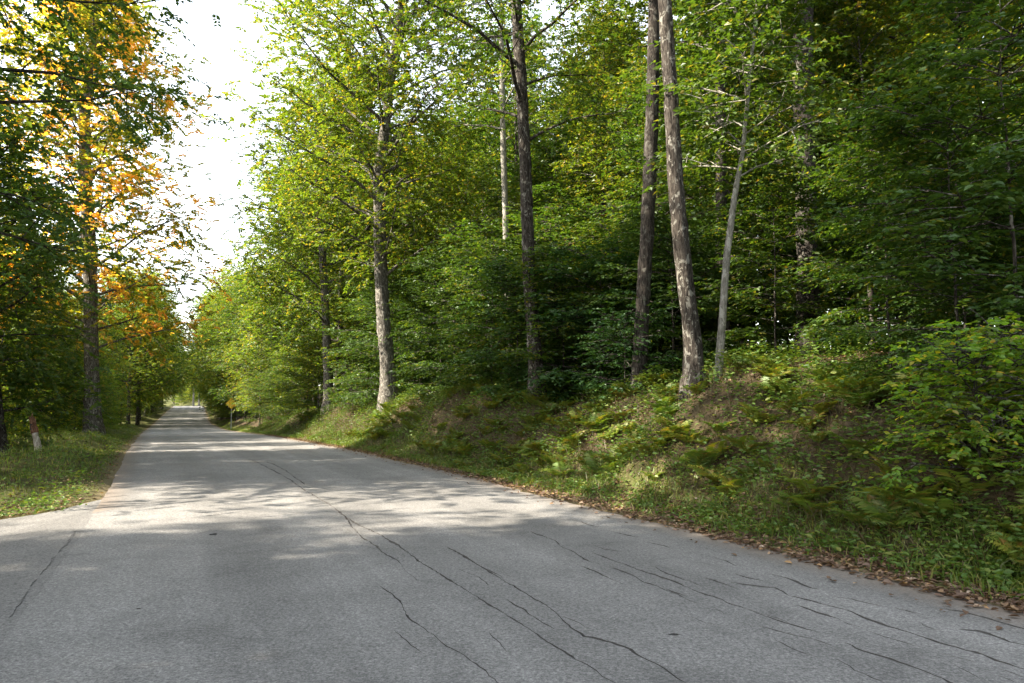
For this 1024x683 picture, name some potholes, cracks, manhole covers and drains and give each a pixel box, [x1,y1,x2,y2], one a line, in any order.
crack [530,522,1024,683]
crack [249,459,684,683]
